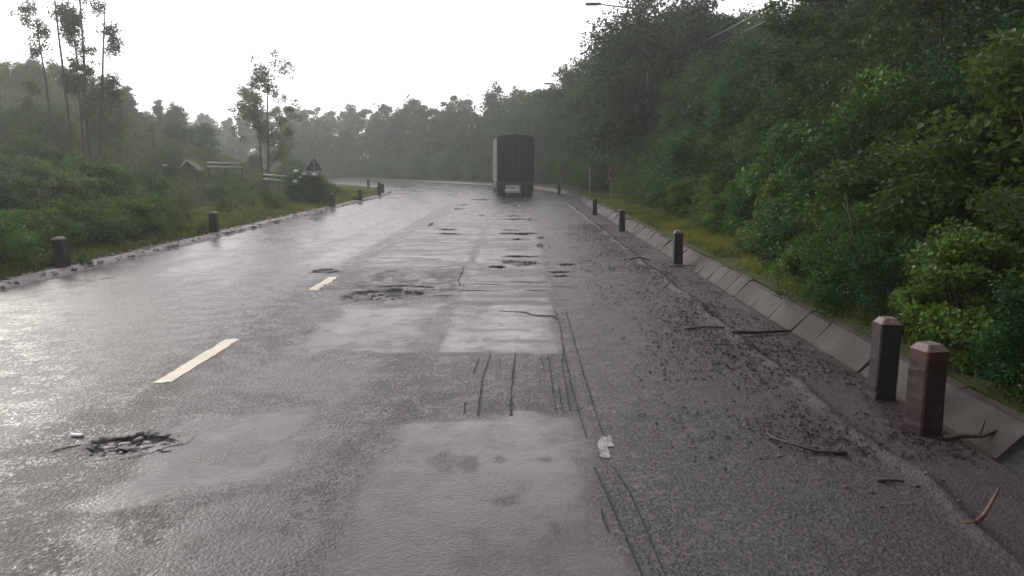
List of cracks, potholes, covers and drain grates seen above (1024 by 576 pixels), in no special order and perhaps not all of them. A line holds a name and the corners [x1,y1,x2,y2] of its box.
pothole [70,429,193,462]
pothole [333,287,436,302]
crack [594,467,666,576]
crack [371,266,604,438]
